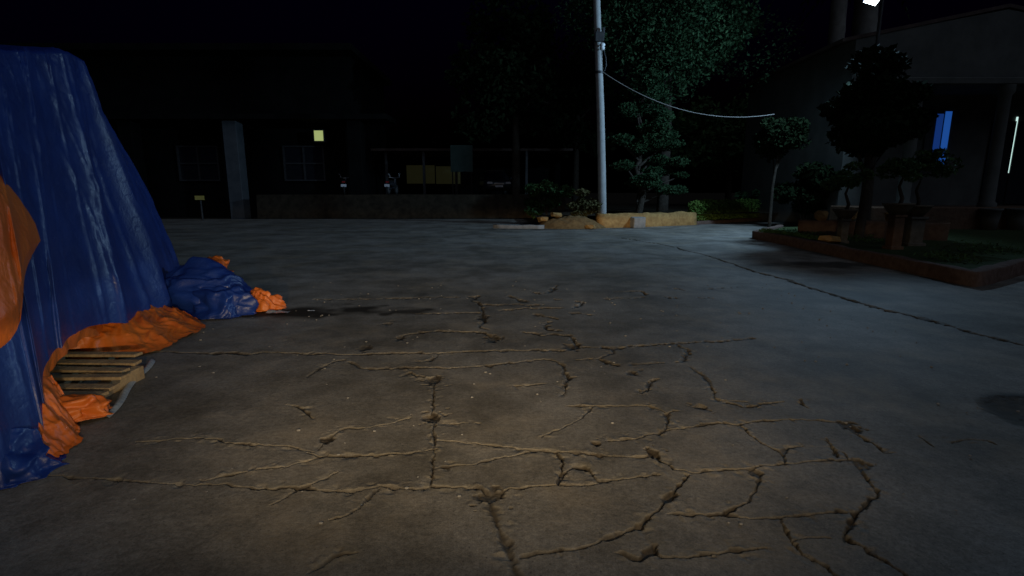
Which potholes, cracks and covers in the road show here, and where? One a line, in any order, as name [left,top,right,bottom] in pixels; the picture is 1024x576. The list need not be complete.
crack [48,285,909,576]
